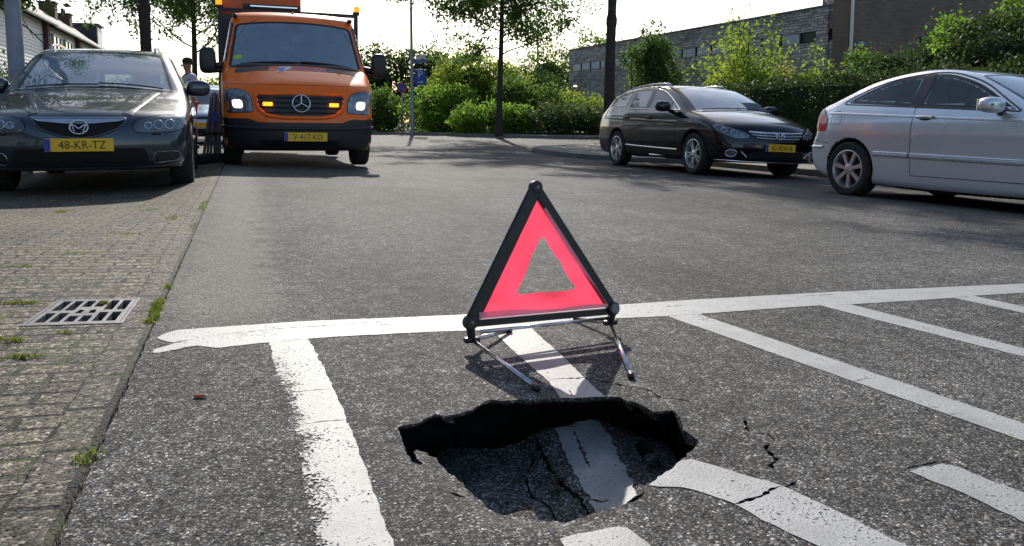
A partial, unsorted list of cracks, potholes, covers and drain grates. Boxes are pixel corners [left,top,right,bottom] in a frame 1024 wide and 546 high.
drain grate [20,298,141,327]
crack [722,411,797,505]
crack [569,378,687,406]
pothole [344,381,698,523]
